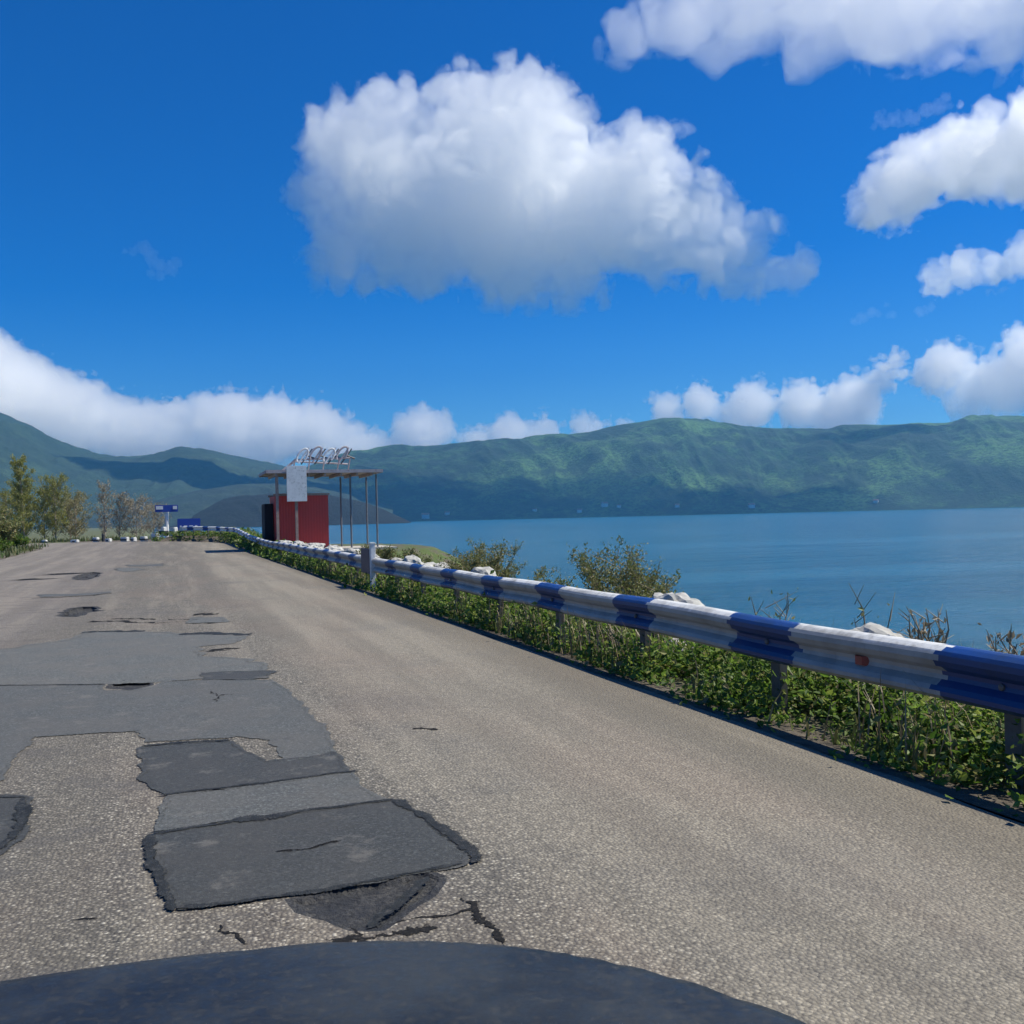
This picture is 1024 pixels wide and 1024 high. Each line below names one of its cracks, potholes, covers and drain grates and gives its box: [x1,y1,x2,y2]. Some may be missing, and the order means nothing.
crack [218,924,246,944]
crack [332,897,505,945]
pothole [263,868,470,942]
crack [275,840,337,852]
pothole [41,605,118,619]
pothole [62,572,111,581]
pothole [98,680,167,690]
